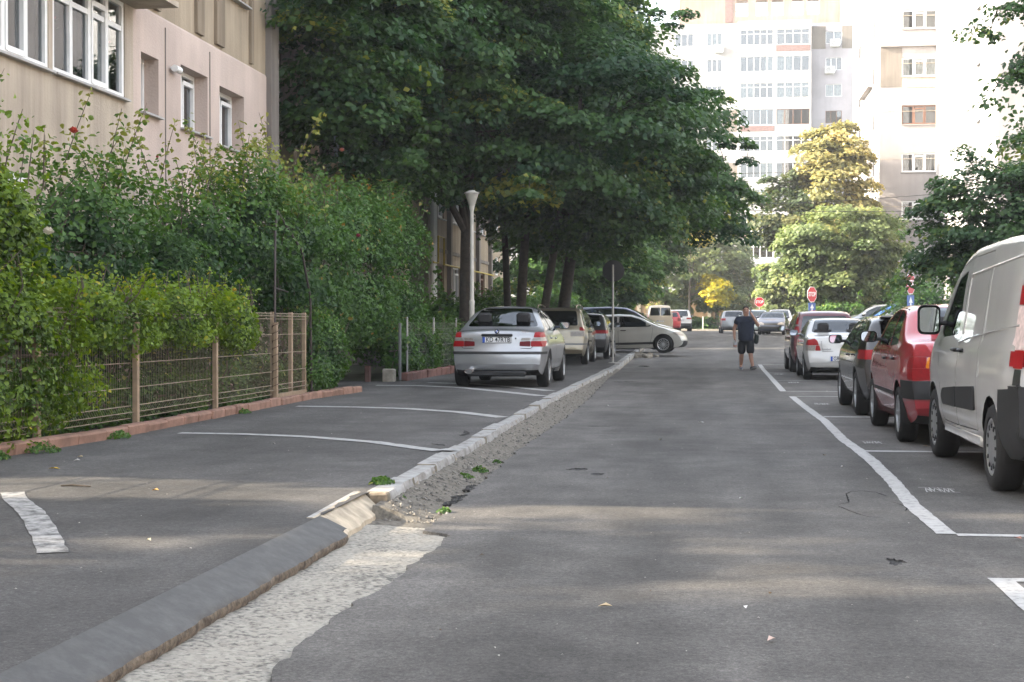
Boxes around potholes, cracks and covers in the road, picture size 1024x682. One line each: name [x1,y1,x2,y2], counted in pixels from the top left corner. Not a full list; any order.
crack [839,491,908,518]
